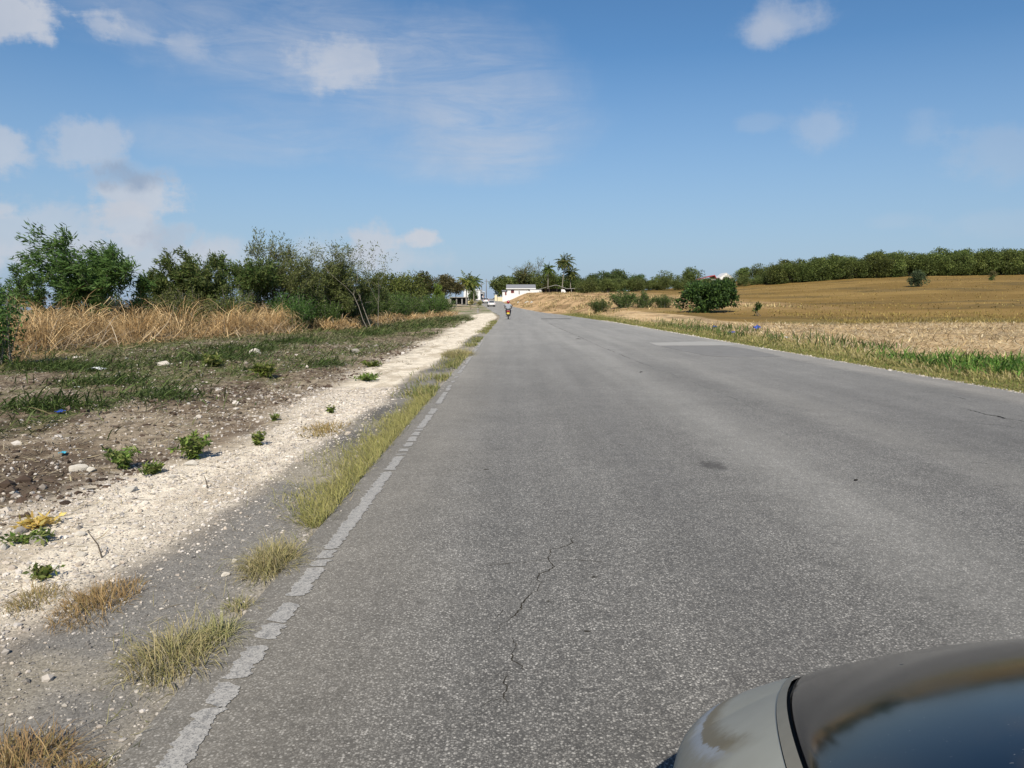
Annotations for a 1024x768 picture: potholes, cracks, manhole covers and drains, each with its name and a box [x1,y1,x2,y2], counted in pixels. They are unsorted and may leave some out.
crack [481,532,603,707]
